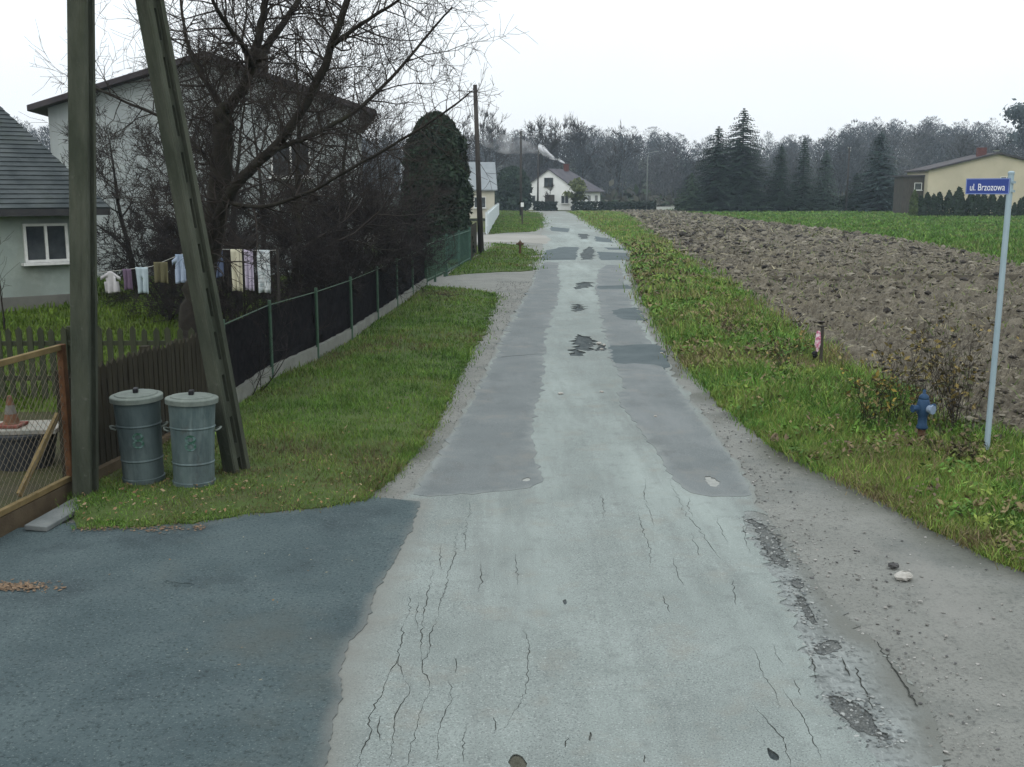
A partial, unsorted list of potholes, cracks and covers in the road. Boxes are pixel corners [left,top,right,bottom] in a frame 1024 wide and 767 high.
crack [357,504,496,766]
pothole [569,334,599,356]
pothole [508,754,527,767]
pothole [814,640,841,656]
pothole [746,519,789,568]
crack [600,487,750,611]
pothole [580,247,595,260]
crack [842,642,918,708]
crack [750,646,821,764]
pothole [829,695,891,741]
pothole [796,594,818,625]
